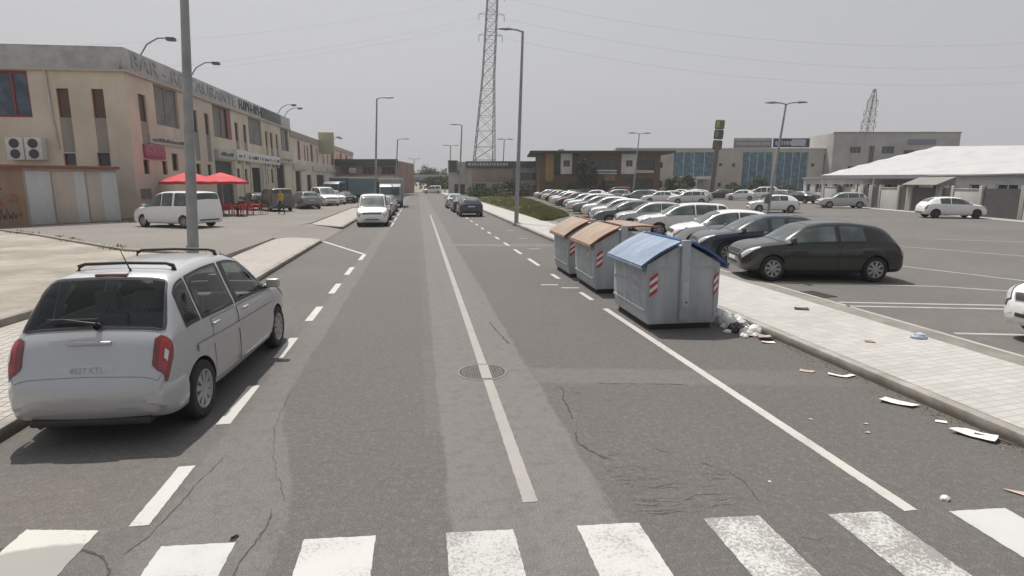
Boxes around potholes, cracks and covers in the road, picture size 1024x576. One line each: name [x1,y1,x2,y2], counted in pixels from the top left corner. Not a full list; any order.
crack [603,448,761,517]
drain grate [800,290,837,298]
manhole cover [457,364,508,380]
crack [232,510,272,576]
